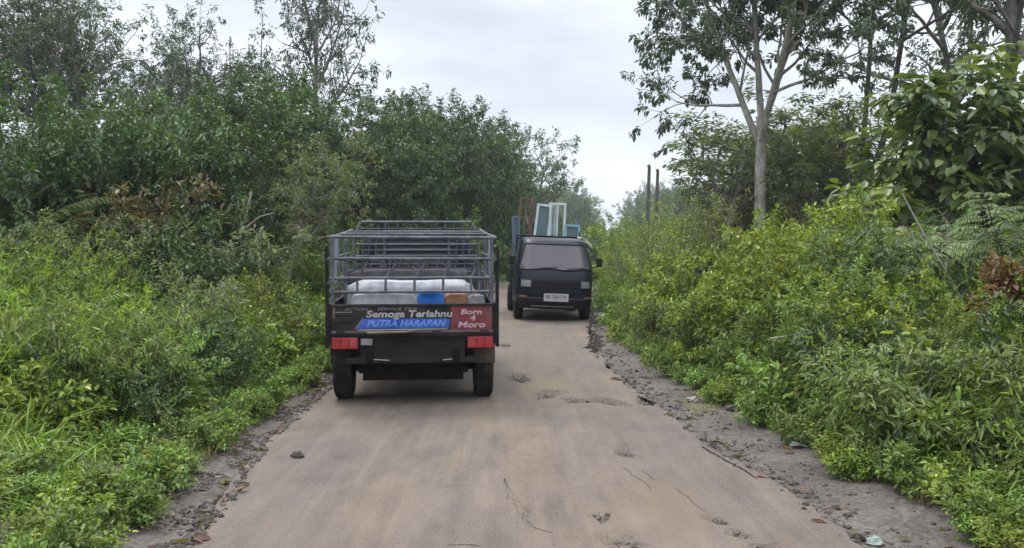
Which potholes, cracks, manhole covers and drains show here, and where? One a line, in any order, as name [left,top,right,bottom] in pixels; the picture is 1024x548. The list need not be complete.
pothole [612,448,640,458]
pothole [507,373,531,383]
pothole [532,389,569,401]
pothole [585,396,634,407]
pothole [586,510,613,524]
crack [676,446,758,512]
